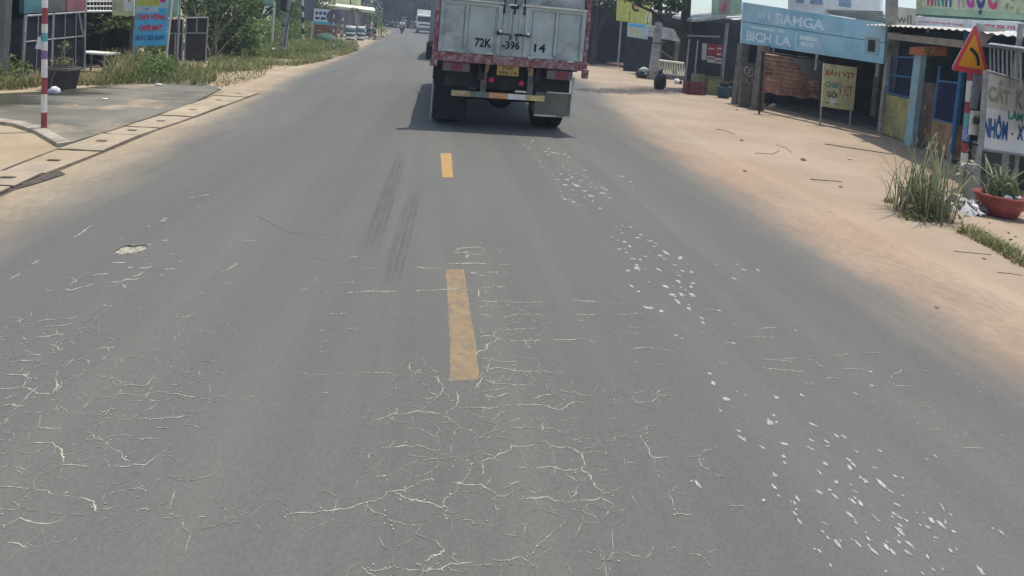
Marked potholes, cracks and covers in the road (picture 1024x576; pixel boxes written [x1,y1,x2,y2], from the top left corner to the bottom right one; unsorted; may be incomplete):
crack [764,352,873,385]
pothole [111,243,151,255]
crack [292,242,595,381]
crack [622,425,692,515]
crack [552,299,685,365]
